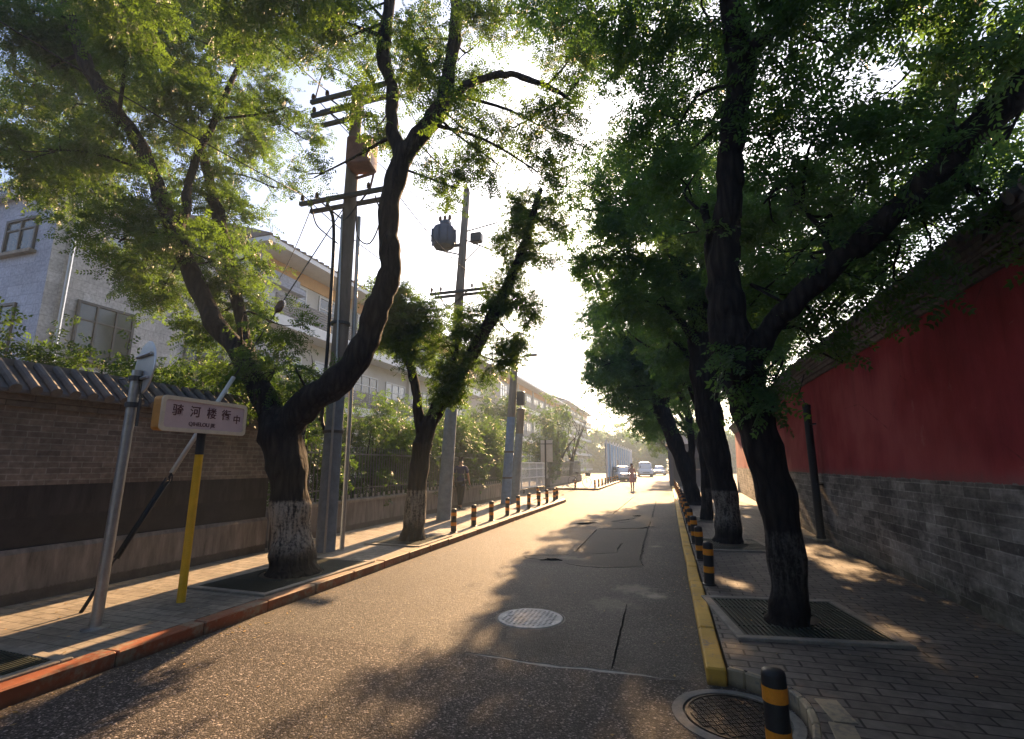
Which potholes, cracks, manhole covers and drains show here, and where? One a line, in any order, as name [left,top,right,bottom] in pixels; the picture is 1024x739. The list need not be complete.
manhole cover [672,689,808,739]
crack [612,604,627,667]
manhole cover [495,608,566,629]
